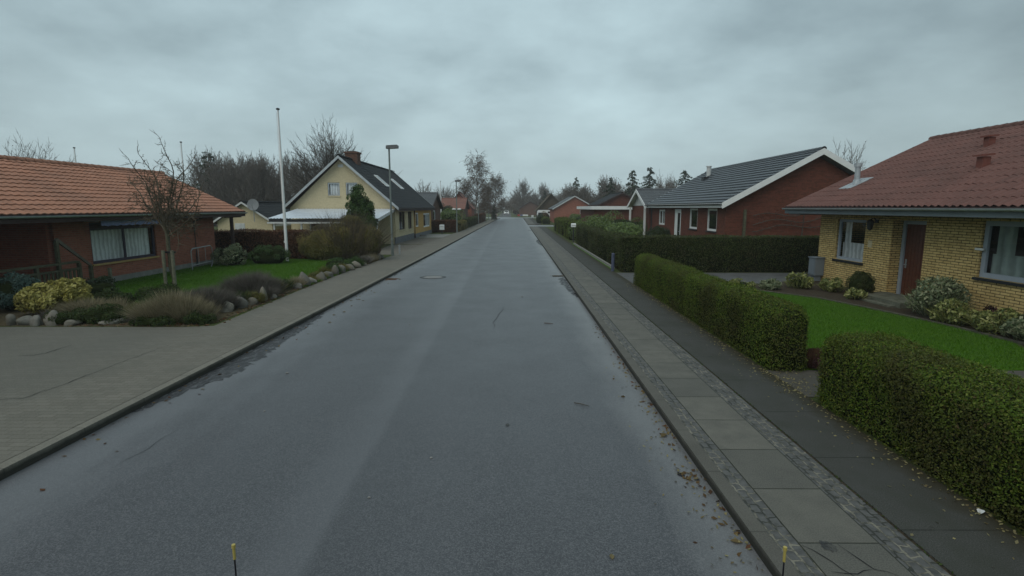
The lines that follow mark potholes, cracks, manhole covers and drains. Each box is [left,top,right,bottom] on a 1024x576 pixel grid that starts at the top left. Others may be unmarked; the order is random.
crack [805,545,898,576]
